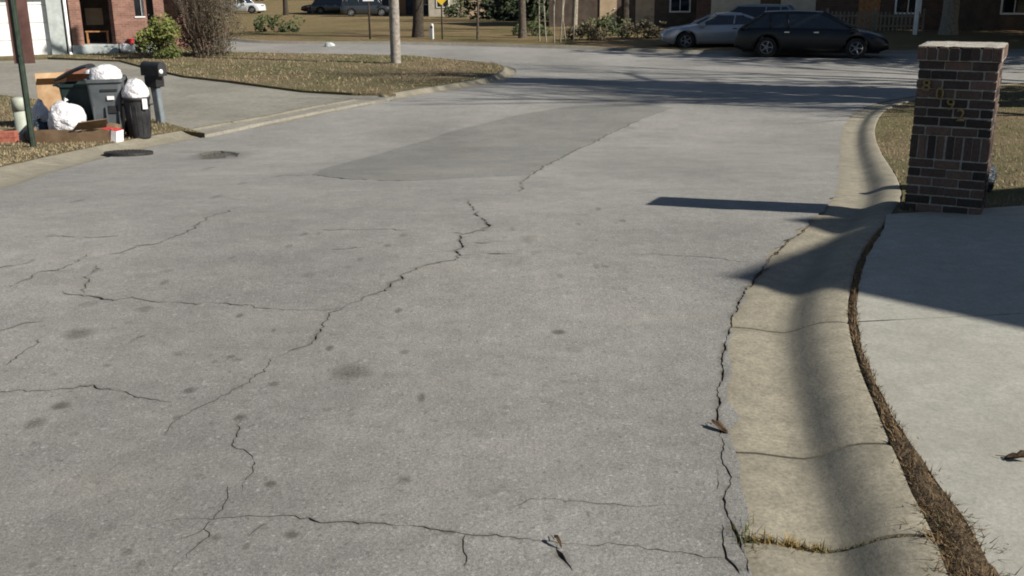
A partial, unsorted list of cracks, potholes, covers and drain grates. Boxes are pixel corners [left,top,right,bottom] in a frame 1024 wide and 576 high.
crack [0,255,268,309]
crack [168,203,491,429]
crack [172,426,719,571]
crack [710,226,809,574]
manhole cover [104,149,153,157]
